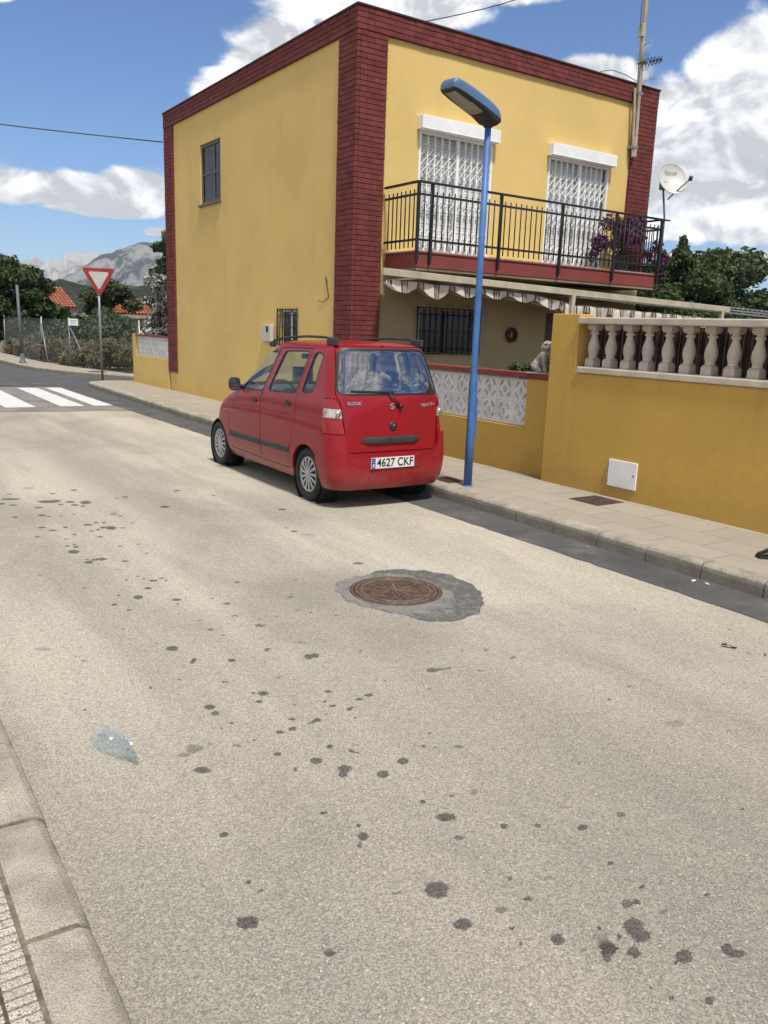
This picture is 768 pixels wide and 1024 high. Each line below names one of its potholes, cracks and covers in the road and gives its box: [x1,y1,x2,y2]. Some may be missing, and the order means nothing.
manhole cover [350,577,442,606]
utility cover [569,495,624,506]
